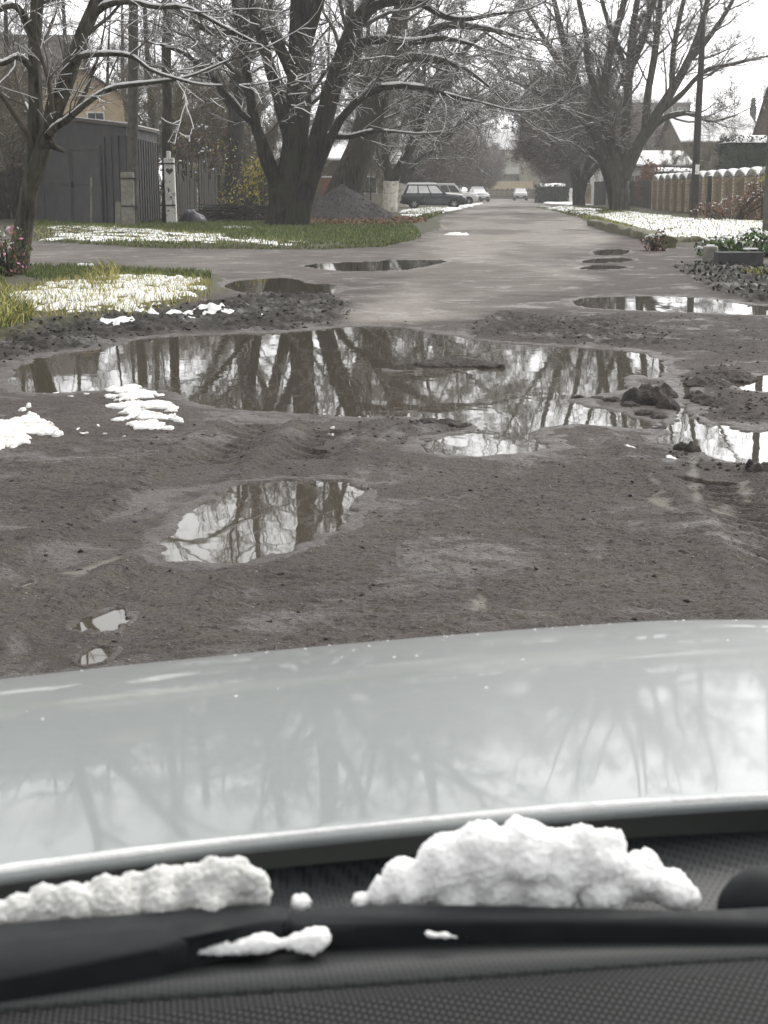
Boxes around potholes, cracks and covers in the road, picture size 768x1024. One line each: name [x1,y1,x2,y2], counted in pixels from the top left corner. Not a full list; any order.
pothole [297,259,453,272]
pothole [62,643,124,668]
pothole [559,295,768,316]
pothole [641,377,768,466]
pothole [0,324,691,461]
pothole [63,606,140,636]
pothole [216,277,349,294]
pothole [138,474,381,571]
